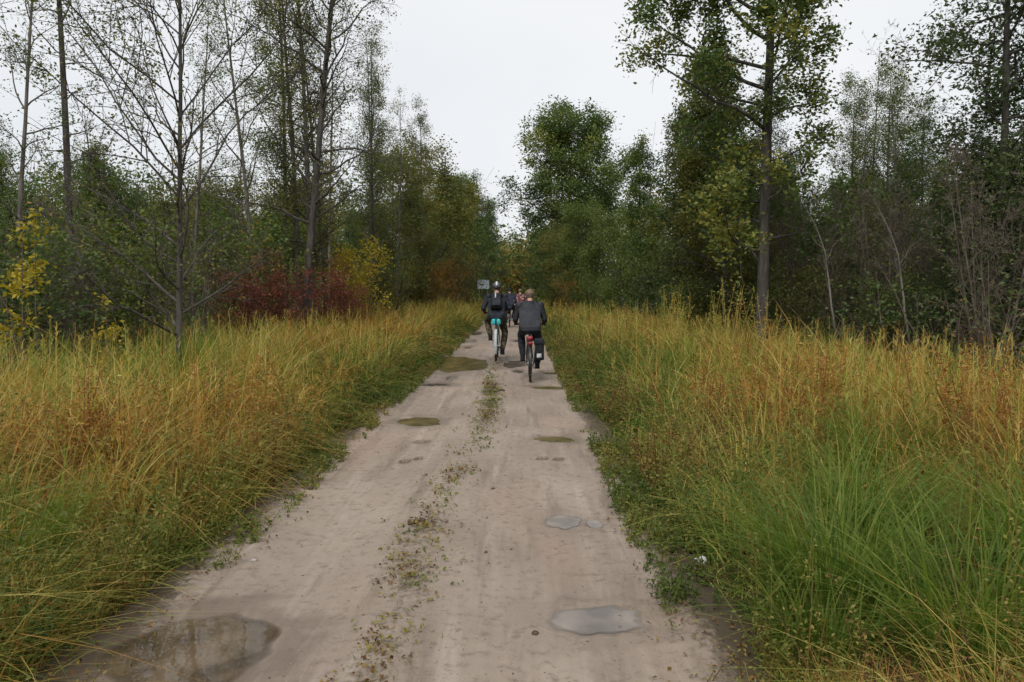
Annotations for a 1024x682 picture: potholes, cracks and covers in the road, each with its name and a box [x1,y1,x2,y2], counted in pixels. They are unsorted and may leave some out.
pothole [536,511,594,531]
pothole [529,600,661,640]
pothole [528,434,580,443]
pothole [392,415,445,427]
pothole [584,518,607,529]
pothole [499,359,535,369]
pothole [429,355,495,374]
pothole [68,601,305,682]
